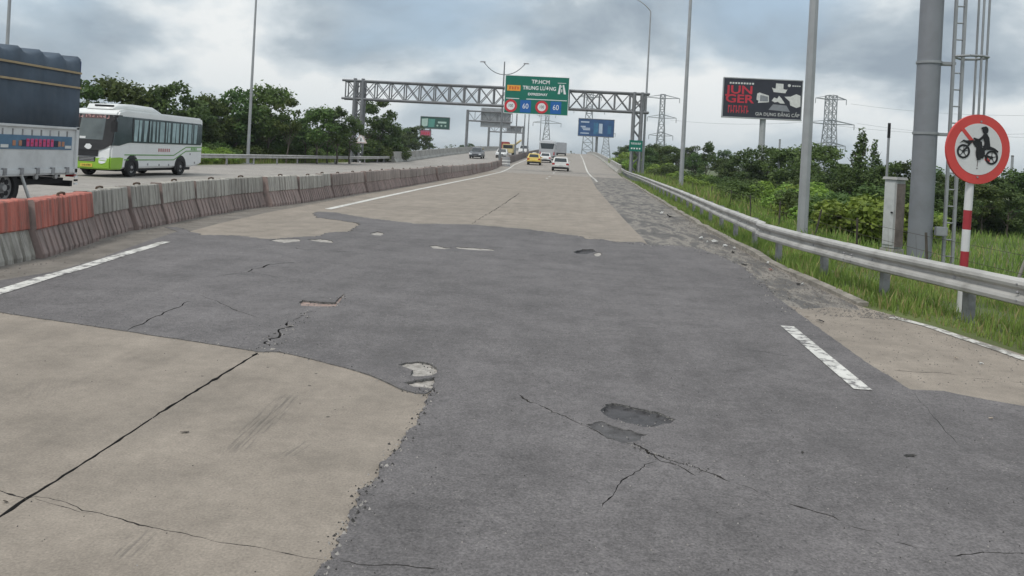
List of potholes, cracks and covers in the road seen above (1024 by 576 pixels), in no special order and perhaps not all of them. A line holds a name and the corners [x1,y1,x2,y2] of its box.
pothole [586,421,647,443]
crack [520,395,875,532]
pothole [398,361,438,376]
pothole [404,377,435,389]
crack [1,491,434,569]
pothole [299,295,343,306]
crack [128,296,252,330]
pothole [601,403,675,427]
crack [264,312,308,346]
